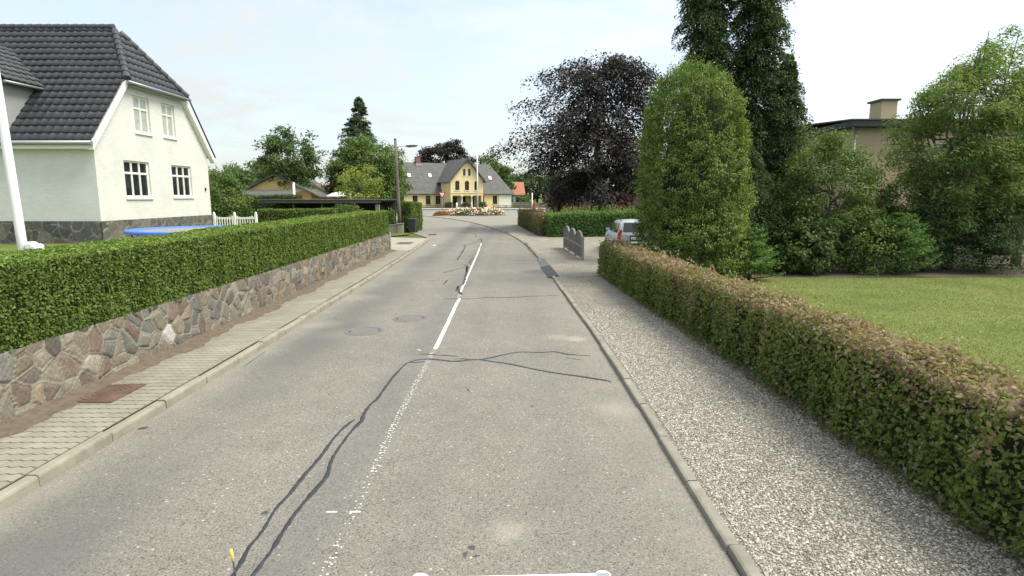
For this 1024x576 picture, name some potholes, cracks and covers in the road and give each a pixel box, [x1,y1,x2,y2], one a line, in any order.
manhole cover [77,384,147,403]
manhole cover [344,326,385,336]
